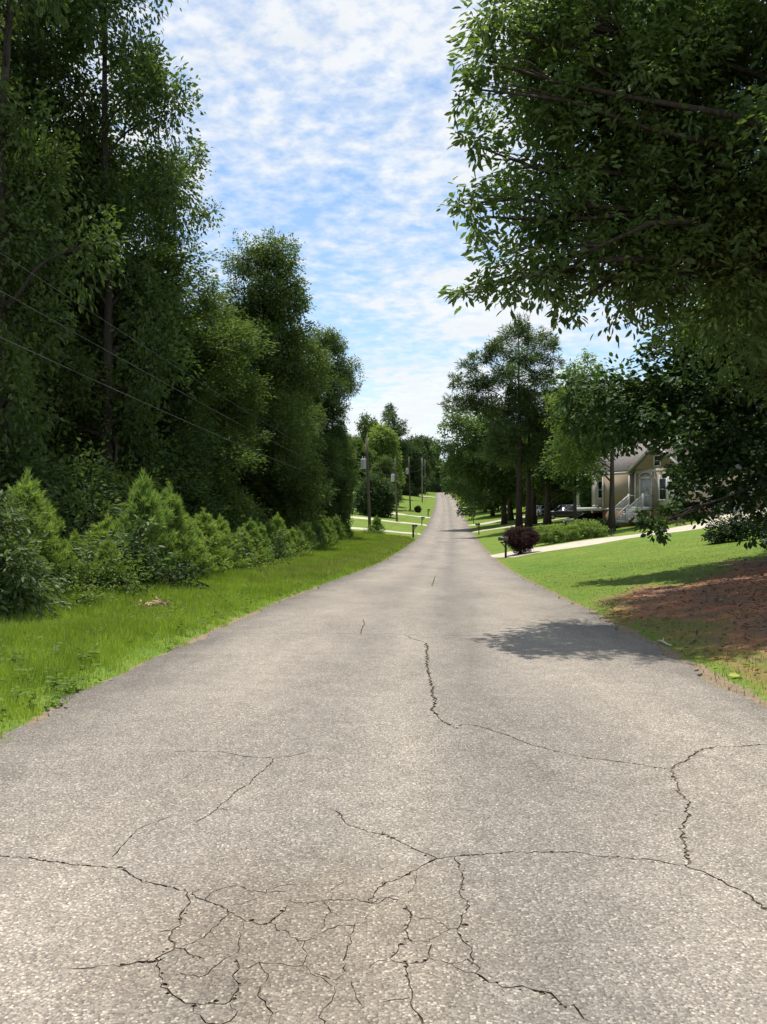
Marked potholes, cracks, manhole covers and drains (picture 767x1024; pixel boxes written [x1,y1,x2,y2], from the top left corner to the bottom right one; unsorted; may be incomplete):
crack [1,620,767,1024]
